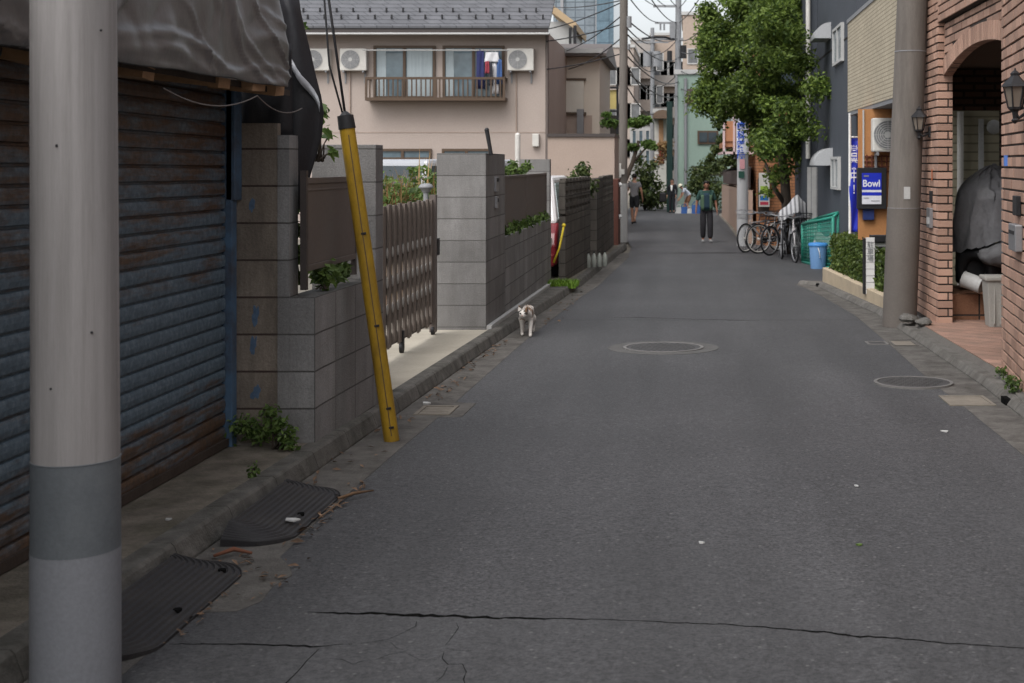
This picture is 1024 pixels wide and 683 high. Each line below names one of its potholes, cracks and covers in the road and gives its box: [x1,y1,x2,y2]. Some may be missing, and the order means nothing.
manhole cover [874,376,953,390]
crack [180,612,1024,683]
manhole cover [608,341,719,355]
